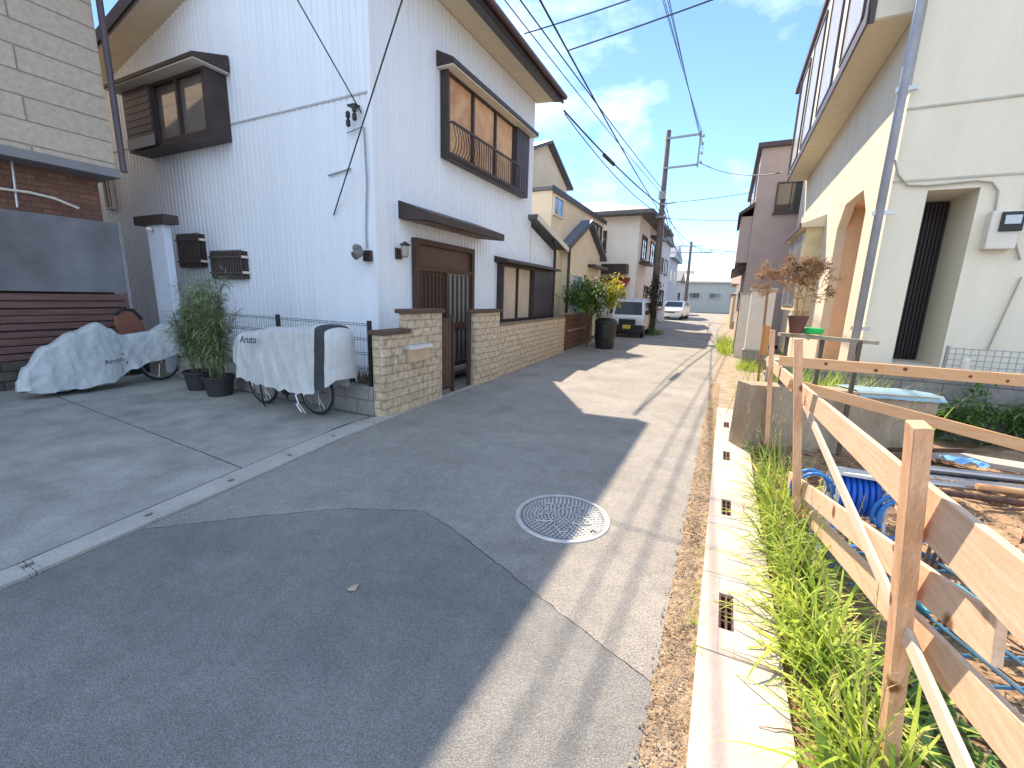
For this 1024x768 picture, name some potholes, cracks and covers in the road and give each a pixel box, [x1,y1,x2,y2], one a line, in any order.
drain grate [721,500,731,516]
manhole cover [516,494,611,543]
drain grate [718,594,734,632]
